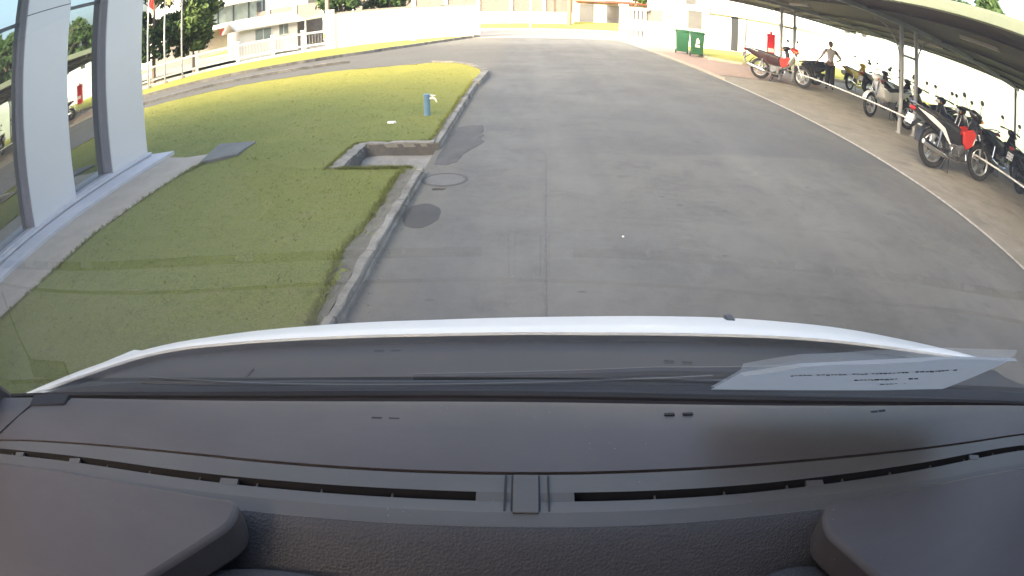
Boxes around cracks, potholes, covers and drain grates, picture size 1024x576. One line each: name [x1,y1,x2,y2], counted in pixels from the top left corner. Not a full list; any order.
manhole cover [422,173,468,187]
